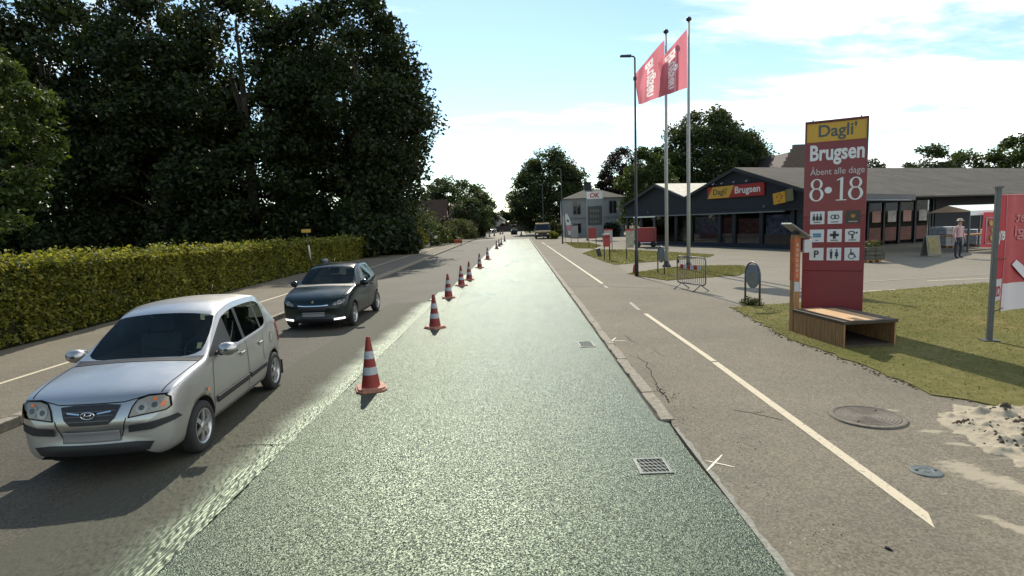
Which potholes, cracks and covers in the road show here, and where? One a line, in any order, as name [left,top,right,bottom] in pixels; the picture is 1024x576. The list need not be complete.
drain grate [633,457,674,475]
manhole cover [828,405,909,430]
utility cover [909,465,944,478]
